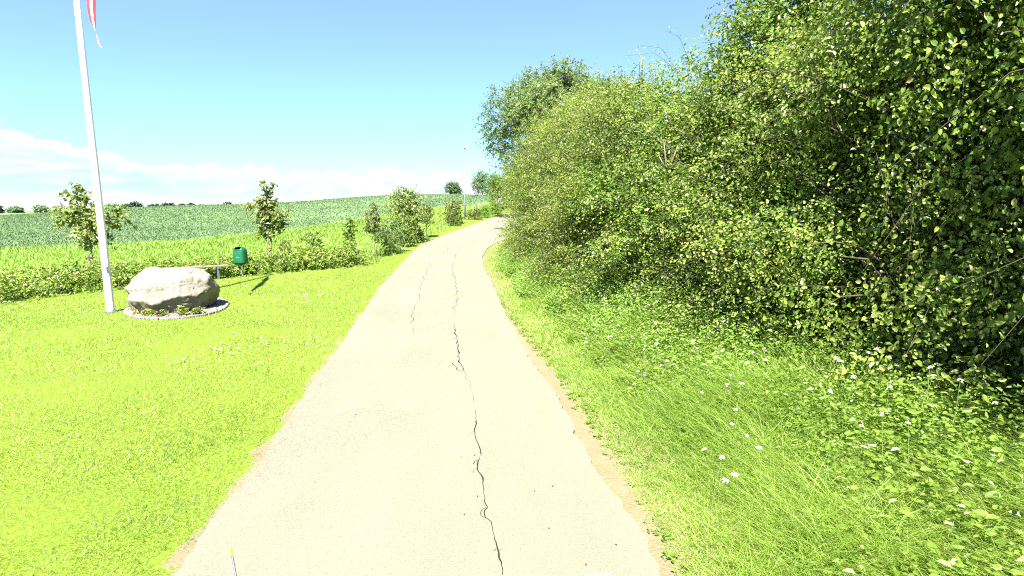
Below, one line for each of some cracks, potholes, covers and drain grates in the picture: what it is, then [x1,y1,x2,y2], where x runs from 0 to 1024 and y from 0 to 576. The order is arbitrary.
crack [411,235,503,576]
